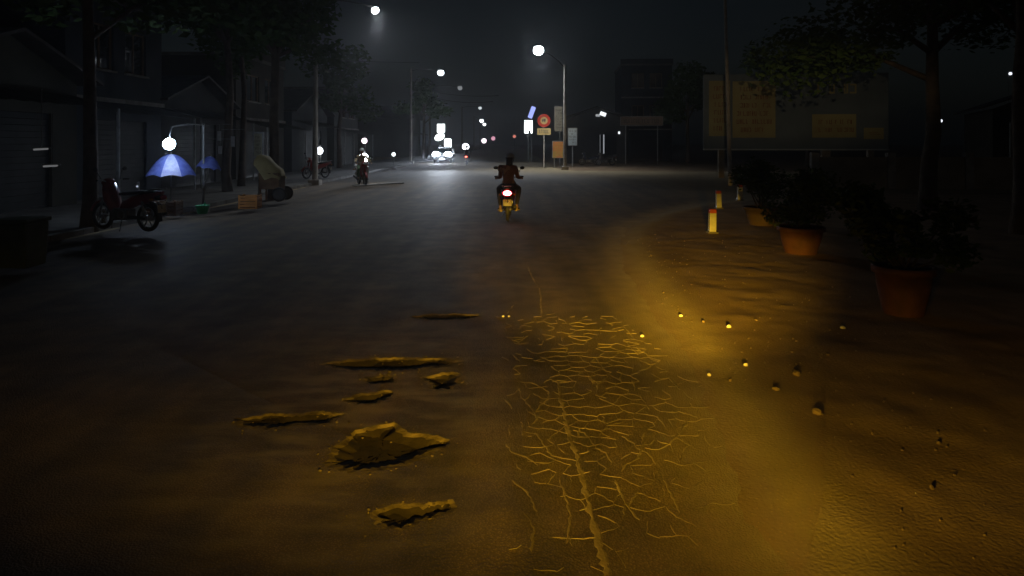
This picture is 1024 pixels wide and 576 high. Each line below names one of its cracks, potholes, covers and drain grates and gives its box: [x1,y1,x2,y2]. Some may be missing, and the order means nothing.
pothole [232,407,359,434]
pothole [337,390,401,406]
pothole [420,372,474,390]
pothole [346,499,463,537]
pothole [359,371,398,385]
crack [499,305,734,575]
pothole [399,313,480,321]
crack [527,267,543,316]
pothole [314,353,466,375]
pothole [317,421,460,477]
